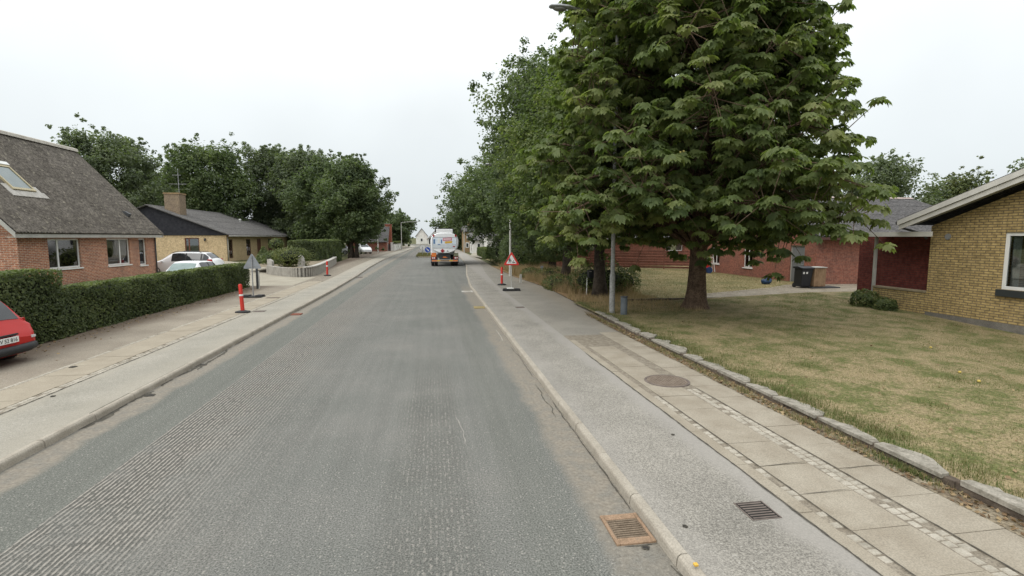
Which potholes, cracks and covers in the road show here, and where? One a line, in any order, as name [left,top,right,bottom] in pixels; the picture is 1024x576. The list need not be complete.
drain grate [733,501,782,521]
manhole cover [644,375,690,387]
drain grate [600,512,657,546]
